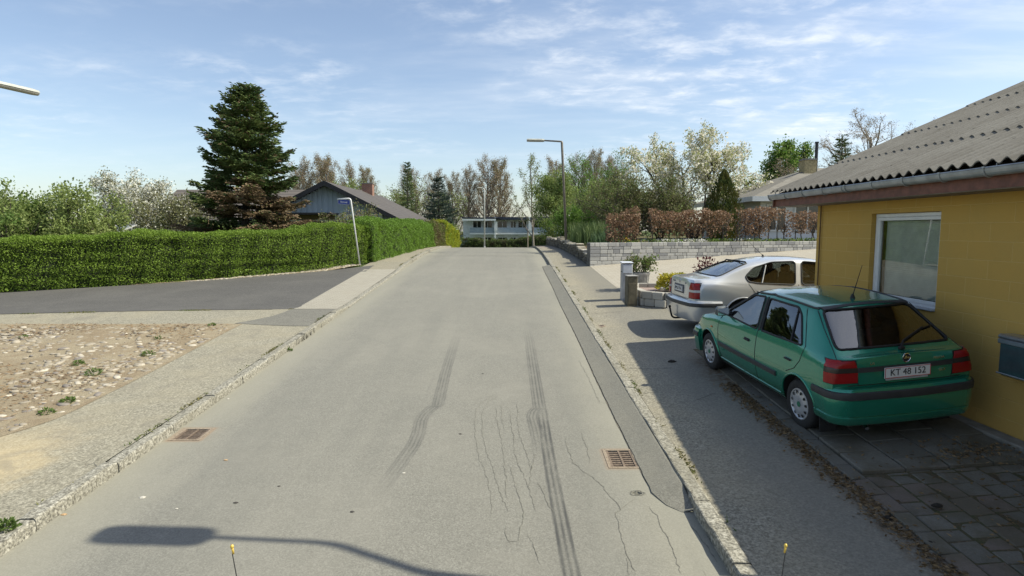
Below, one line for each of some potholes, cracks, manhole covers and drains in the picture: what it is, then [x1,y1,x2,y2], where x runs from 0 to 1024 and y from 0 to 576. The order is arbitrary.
crack [651,510,717,573]
drain grate [167,428,215,441]
drain grate [602,449,640,468]
crack [565,437,636,575]
